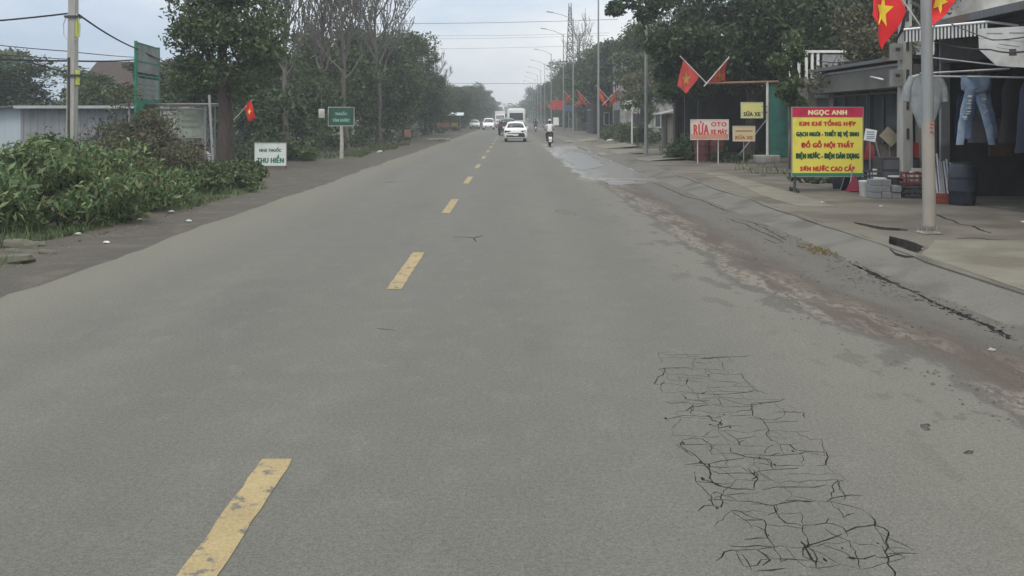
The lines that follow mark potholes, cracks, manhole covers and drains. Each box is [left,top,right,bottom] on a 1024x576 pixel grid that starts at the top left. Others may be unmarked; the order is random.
crack [654,353,918,576]
crack [936,214,996,240]
